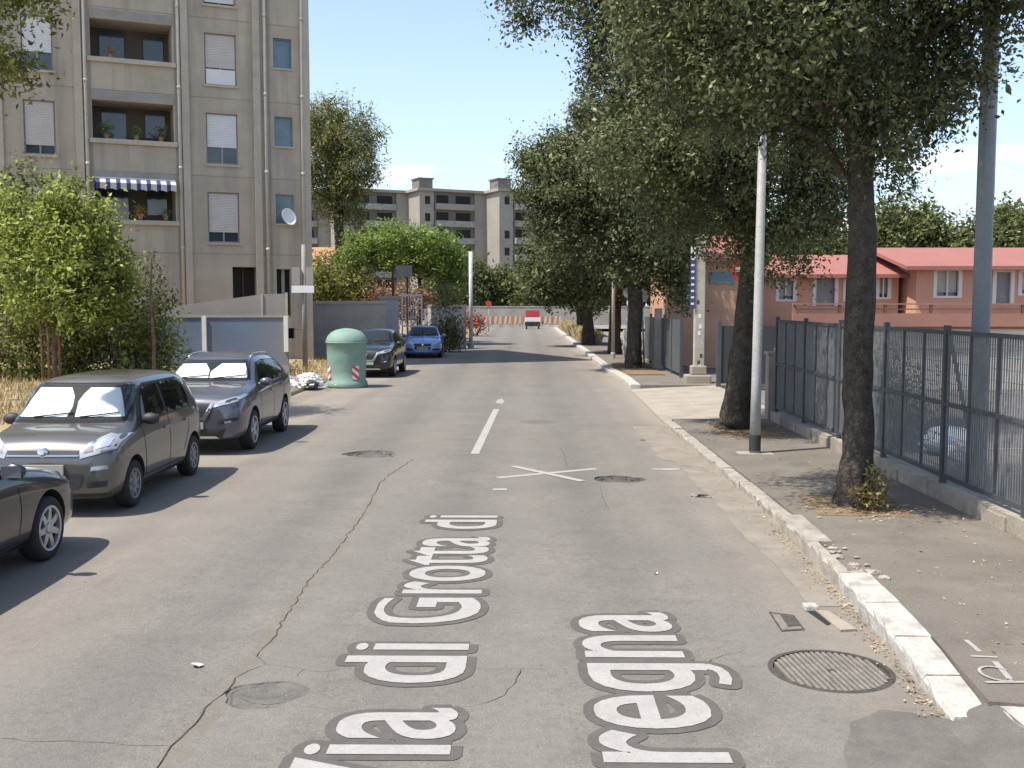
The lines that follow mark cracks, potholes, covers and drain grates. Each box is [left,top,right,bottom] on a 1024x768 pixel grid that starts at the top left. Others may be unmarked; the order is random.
crack [0,459,413,768]
crack [467,668,541,707]
